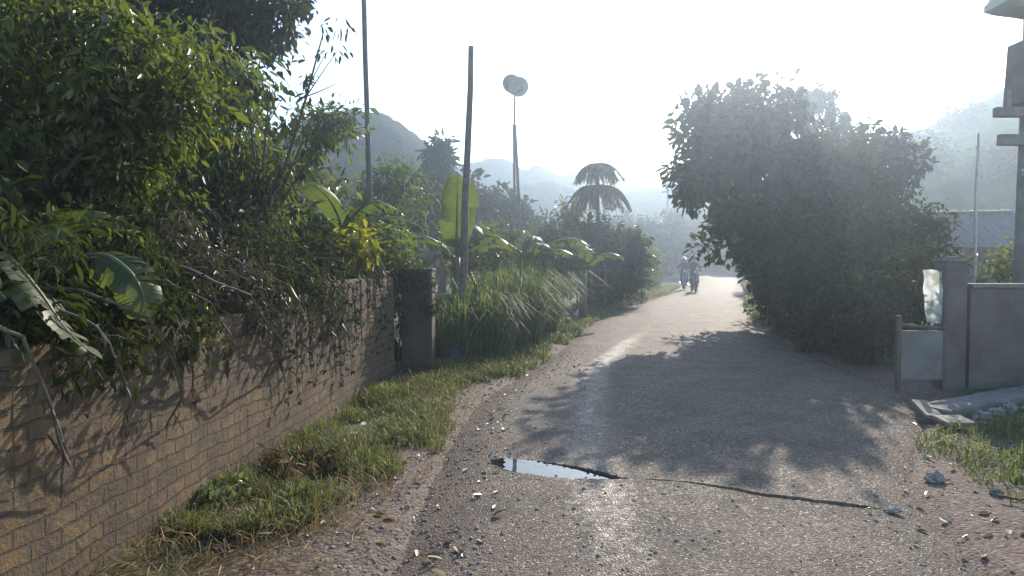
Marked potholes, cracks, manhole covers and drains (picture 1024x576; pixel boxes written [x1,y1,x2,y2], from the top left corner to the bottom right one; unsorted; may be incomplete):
pothole [490,458,622,479]
crack [636,478,880,509]
